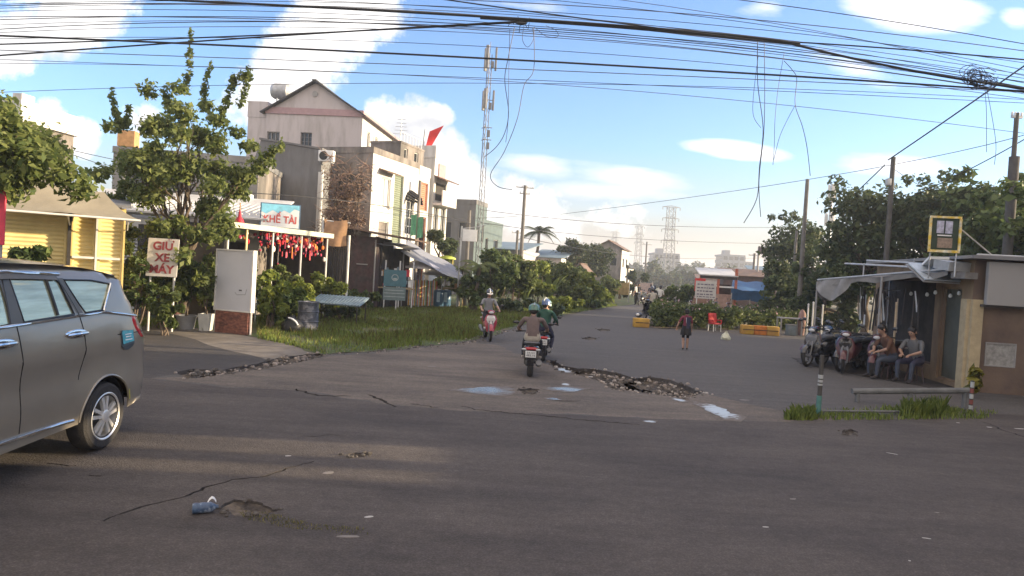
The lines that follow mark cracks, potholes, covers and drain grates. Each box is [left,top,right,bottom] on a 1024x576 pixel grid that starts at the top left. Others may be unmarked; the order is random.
crack [103,461,314,521]
pothole [545,359,714,399]
pothole [174,351,326,379]
pothole [218,498,283,517]
